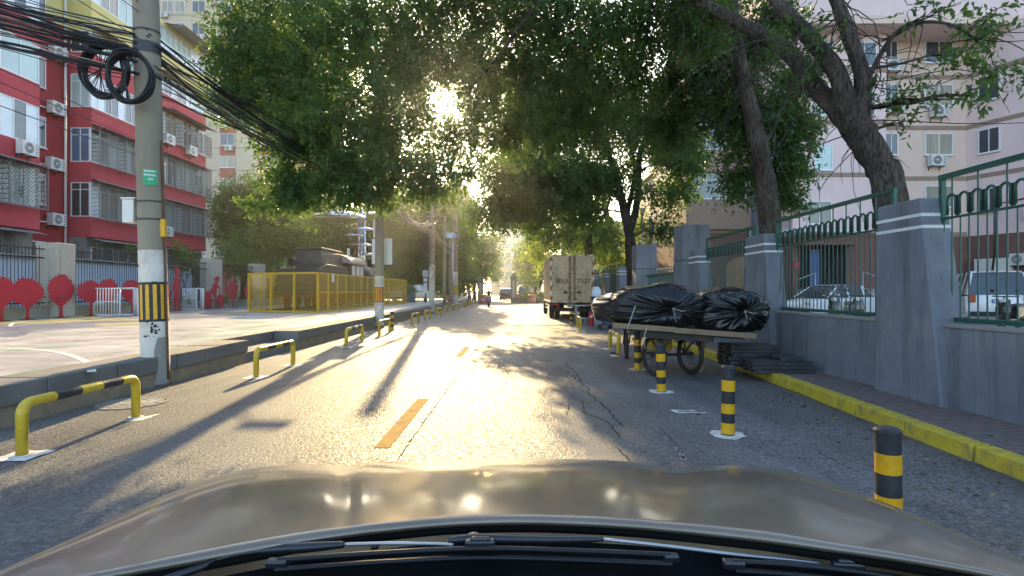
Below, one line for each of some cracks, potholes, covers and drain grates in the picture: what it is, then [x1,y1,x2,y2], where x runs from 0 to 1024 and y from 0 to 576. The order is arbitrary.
manhole cover [89,396,170,410]
crack [546,360,673,461]
